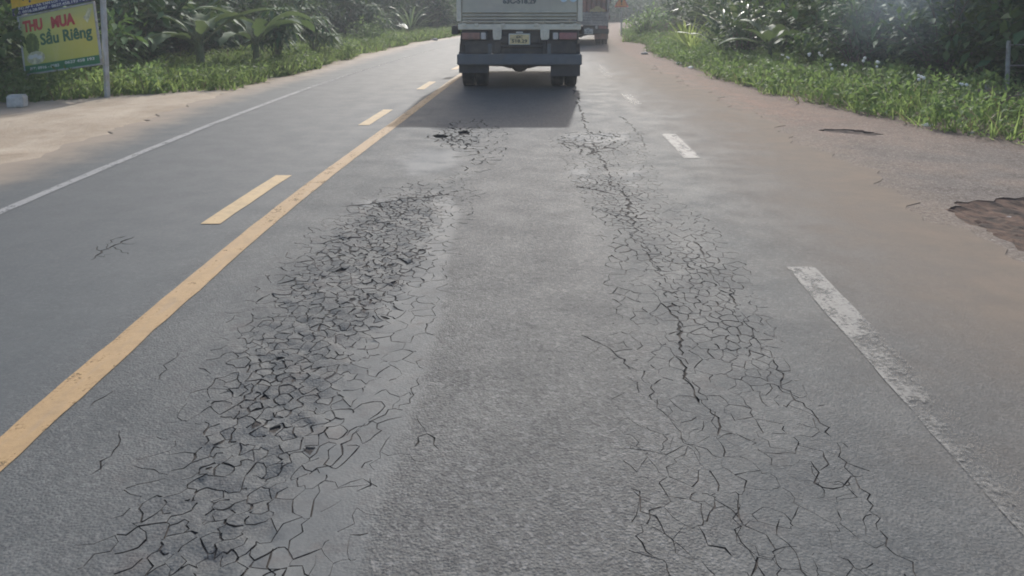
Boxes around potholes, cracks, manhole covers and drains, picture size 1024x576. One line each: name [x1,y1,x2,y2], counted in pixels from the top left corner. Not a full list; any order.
pothole [946,197,1024,251]
crack [548,90,933,576]
crack [92,236,133,260]
